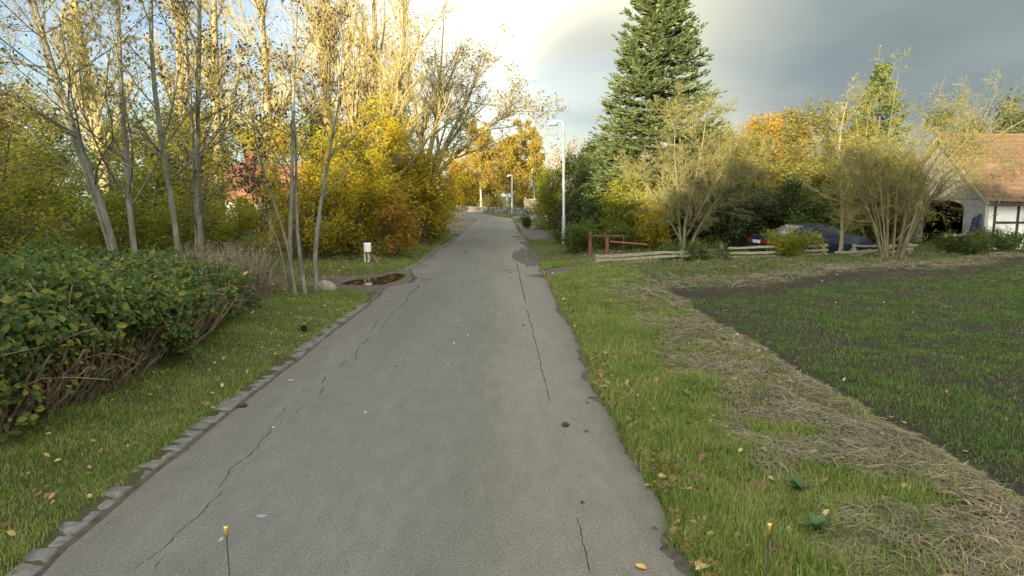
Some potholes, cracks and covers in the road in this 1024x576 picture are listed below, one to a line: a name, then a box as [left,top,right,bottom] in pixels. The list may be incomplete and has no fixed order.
crack [577,519,590,572]
crack [508,263,550,402]
crack [303,265,428,395]
crack [131,407,301,575]
